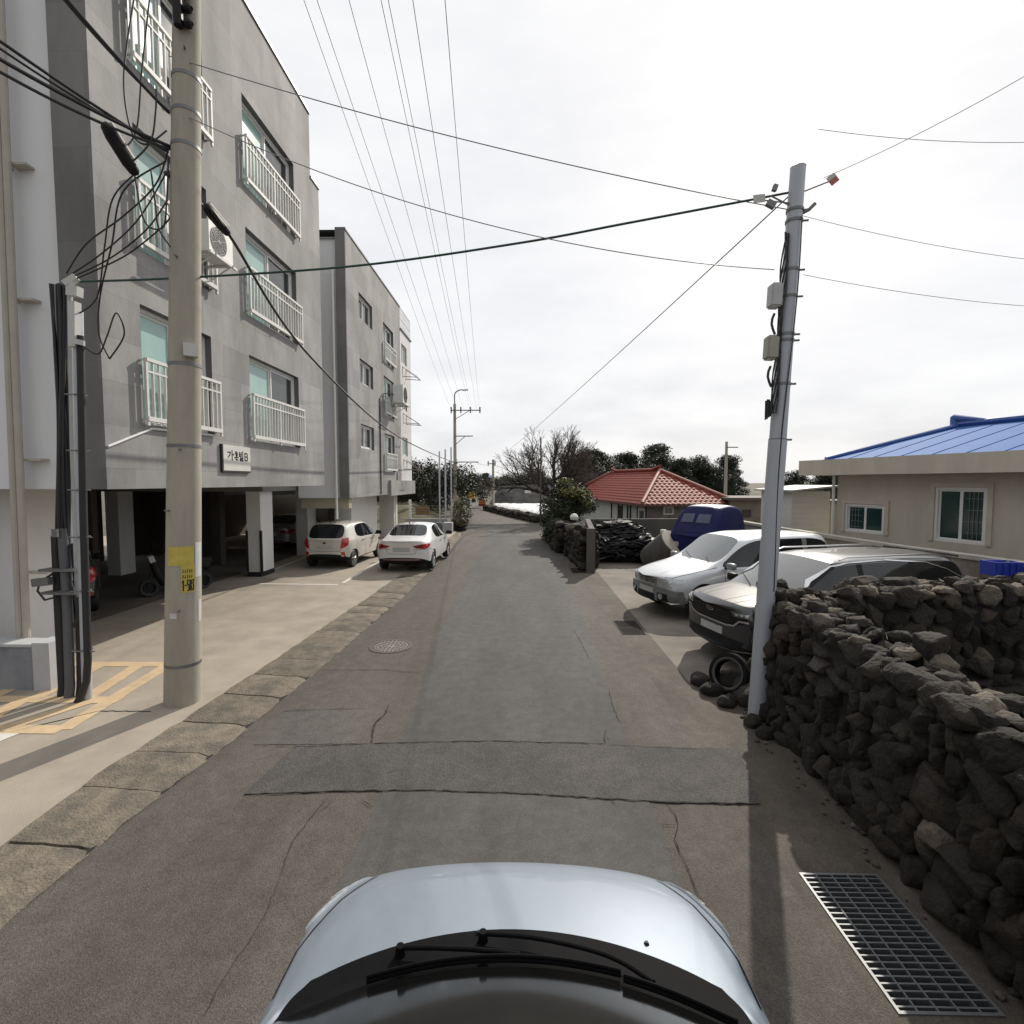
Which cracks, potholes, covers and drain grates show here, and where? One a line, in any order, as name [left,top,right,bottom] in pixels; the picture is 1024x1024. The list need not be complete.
manhole cover [369,639,413,653]
drain grate [799,872,1006,1017]
crack [371,692,690,749]
drain grate [614,621,647,635]
crack [205,789,744,1012]
